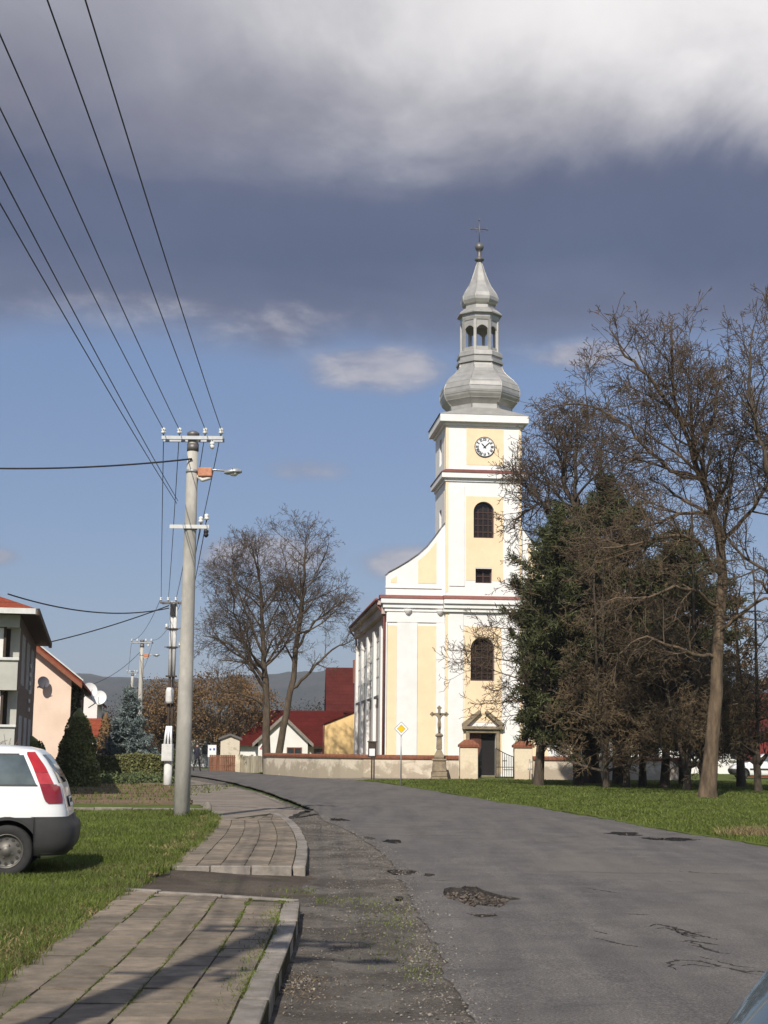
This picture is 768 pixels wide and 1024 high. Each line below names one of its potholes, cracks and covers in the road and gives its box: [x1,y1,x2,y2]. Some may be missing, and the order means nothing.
pothole [443,886,519,907]
crack [624,913,765,975]
